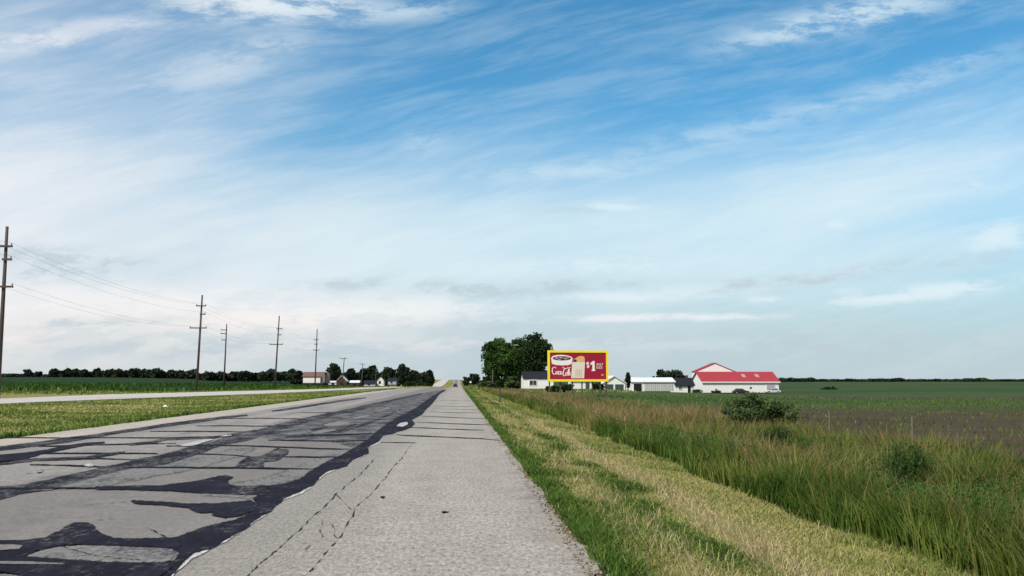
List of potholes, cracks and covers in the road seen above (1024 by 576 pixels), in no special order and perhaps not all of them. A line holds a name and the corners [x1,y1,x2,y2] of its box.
crack [247,451,407,576]
